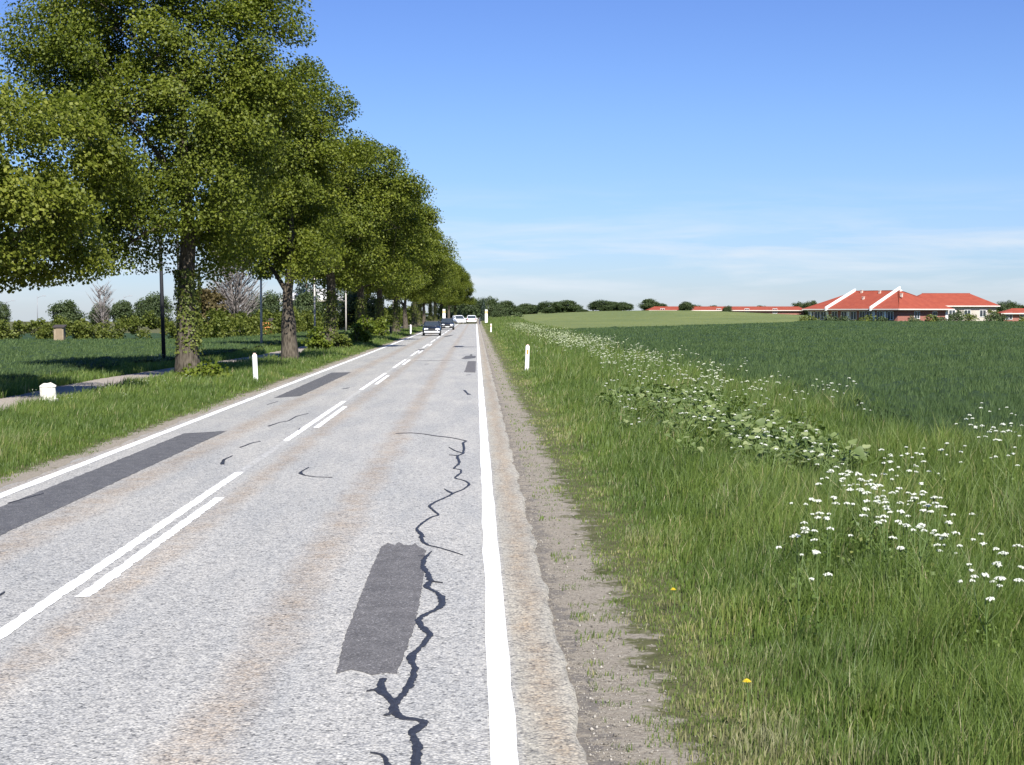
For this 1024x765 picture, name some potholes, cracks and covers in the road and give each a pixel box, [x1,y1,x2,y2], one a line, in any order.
crack [239,401,309,448]
crack [370,751,392,765]
